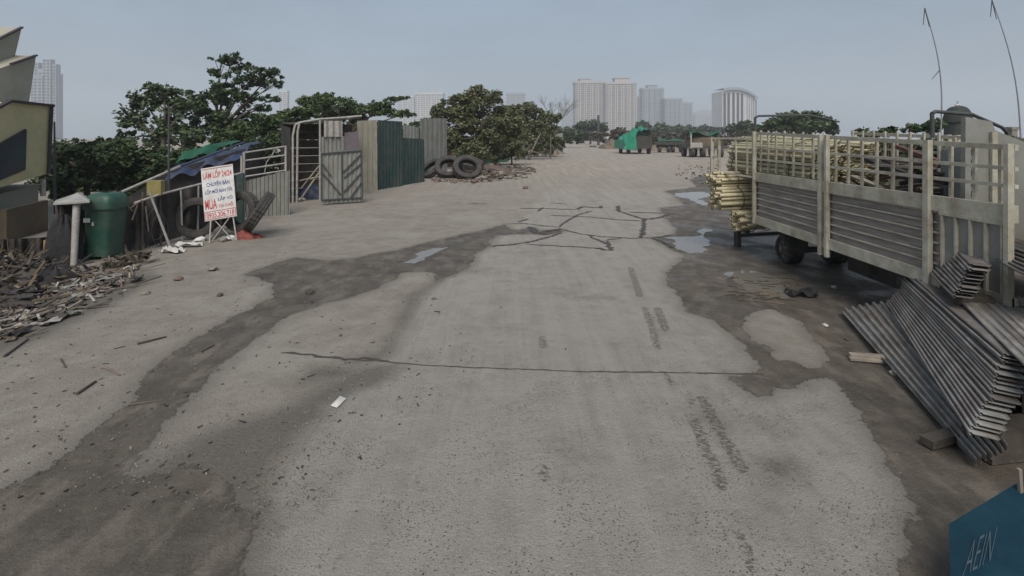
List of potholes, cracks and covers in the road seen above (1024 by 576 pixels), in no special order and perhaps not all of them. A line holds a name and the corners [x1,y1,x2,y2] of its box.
crack [281,352,755,374]
crack [490,202,678,250]
